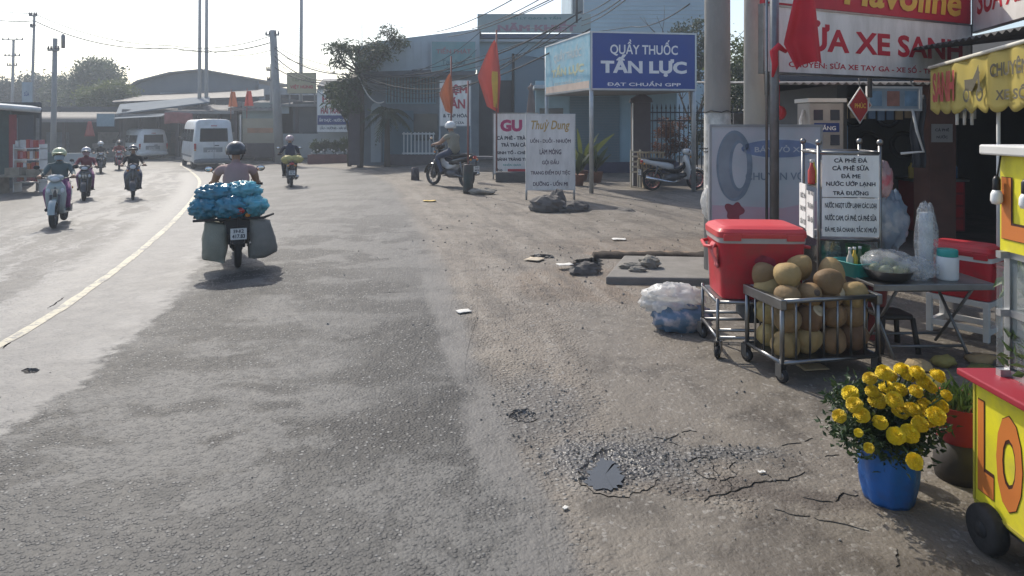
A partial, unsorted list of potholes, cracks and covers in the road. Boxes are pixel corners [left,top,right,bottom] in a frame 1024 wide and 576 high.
crack [654,430,858,502]
pothole [578,447,658,497]
pothole [509,408,537,422]
